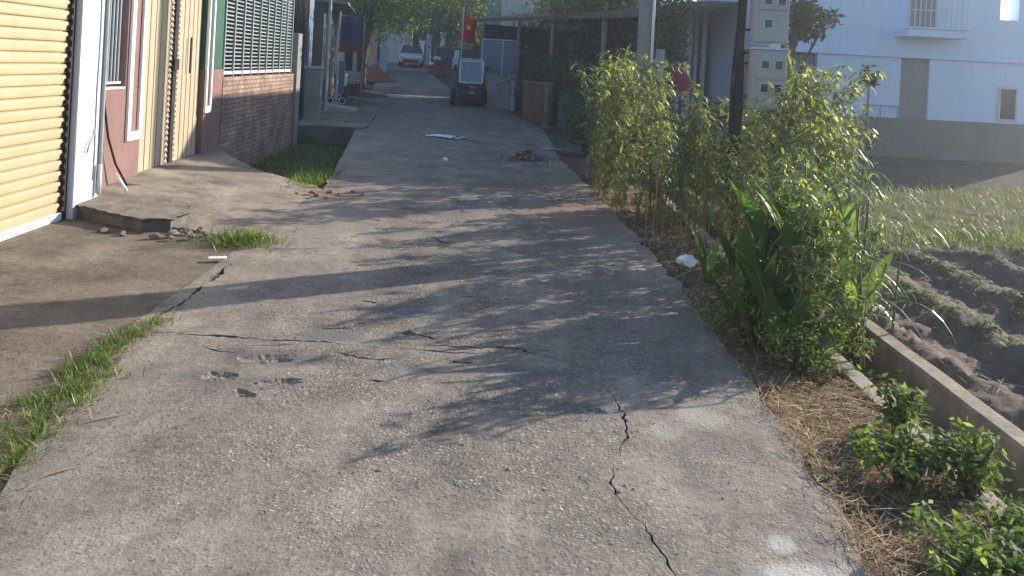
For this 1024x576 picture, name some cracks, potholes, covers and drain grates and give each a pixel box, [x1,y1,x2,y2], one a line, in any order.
pothole [234,354,294,365]
crack [155,264,231,317]
pothole [230,388,258,398]
pothole [200,371,239,381]
pothole [249,378,304,387]
crack [187,328,676,576]
